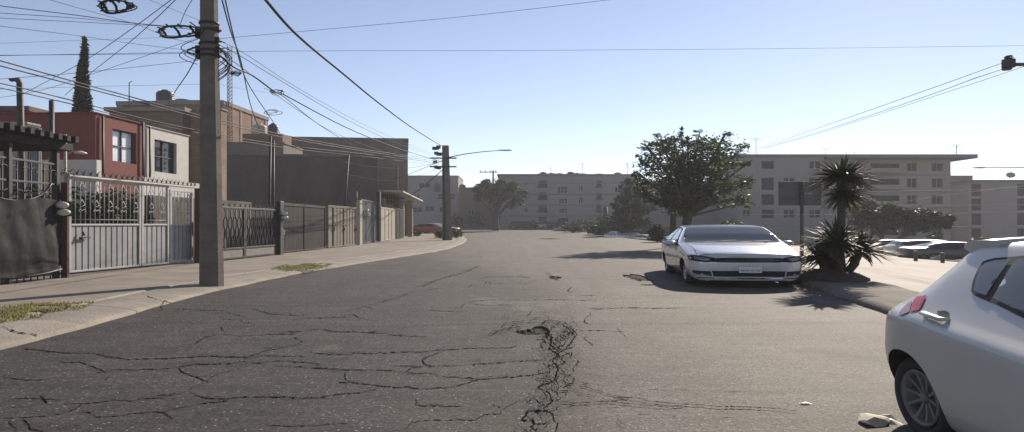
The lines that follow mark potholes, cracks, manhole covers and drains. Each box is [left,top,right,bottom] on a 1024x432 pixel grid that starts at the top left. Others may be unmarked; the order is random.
pothole [623,274,654,282]
pothole [516,326,551,335]
crack [3,256,796,432]
